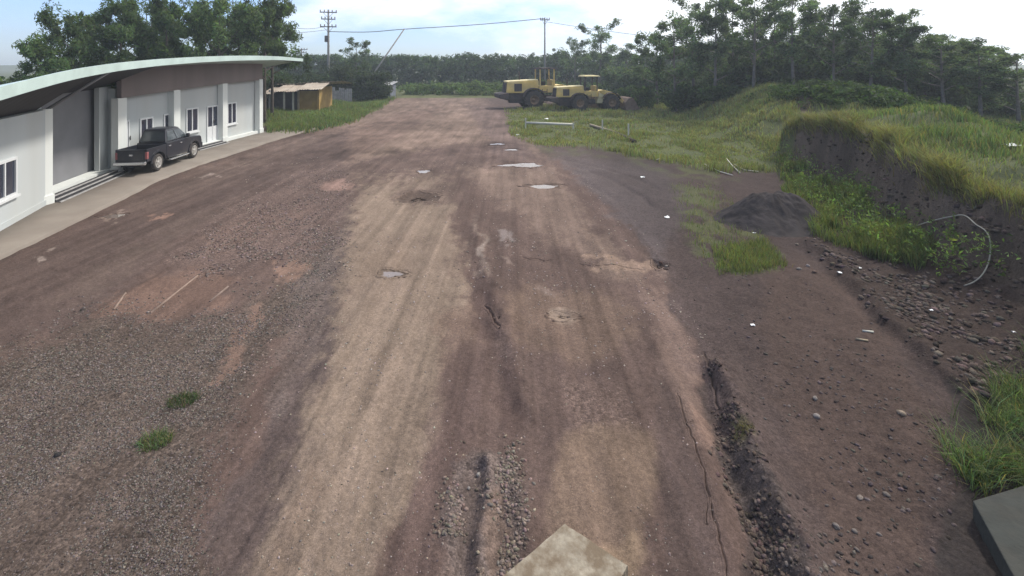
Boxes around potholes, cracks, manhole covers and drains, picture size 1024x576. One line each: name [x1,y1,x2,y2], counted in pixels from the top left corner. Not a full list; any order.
pothole [373,268,413,280]
pothole [389,189,445,206]
crack [579,262,645,272]
pothole [649,259,671,271]
crack [675,352,731,576]
pothole [544,310,586,323]
